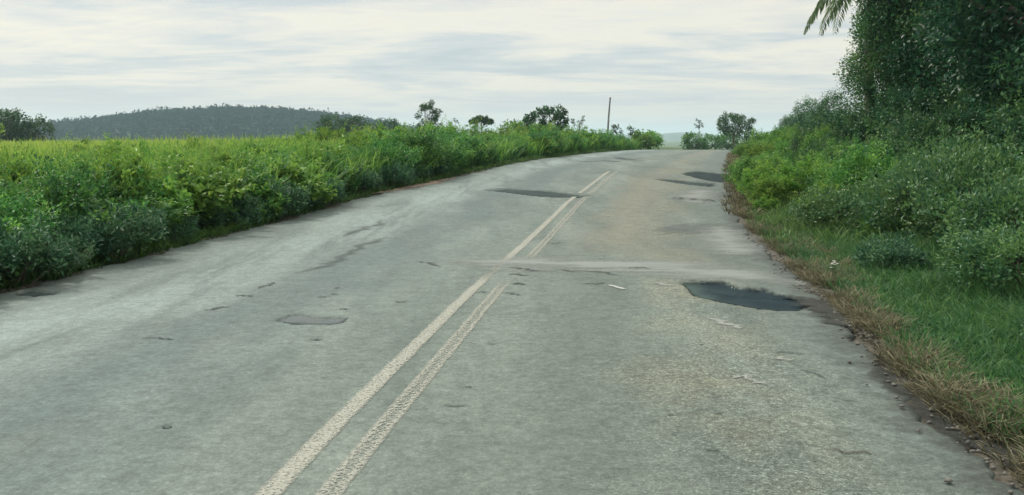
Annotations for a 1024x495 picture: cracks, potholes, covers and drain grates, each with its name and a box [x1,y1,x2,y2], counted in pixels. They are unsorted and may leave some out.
pothole [682,280,806,311]
pothole [279,315,347,325]
